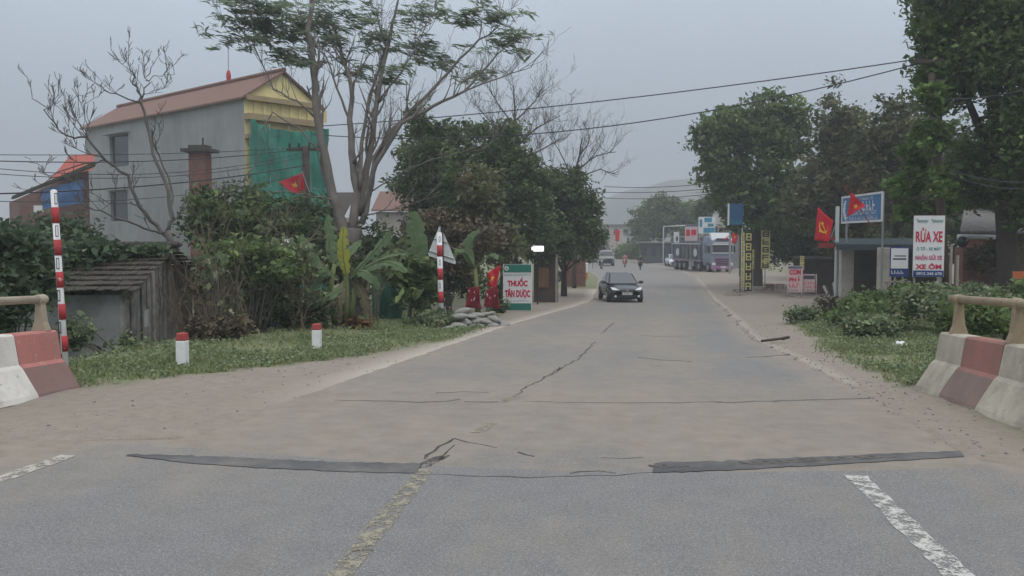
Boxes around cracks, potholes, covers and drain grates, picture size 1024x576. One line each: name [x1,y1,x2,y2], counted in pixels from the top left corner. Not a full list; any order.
crack [340,322,871,403]
crack [421,438,652,478]
